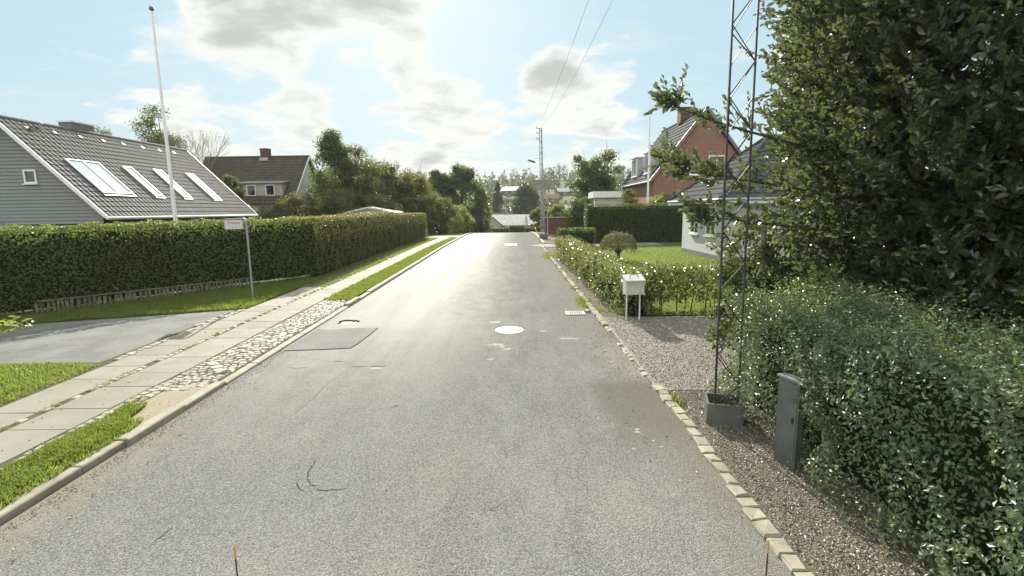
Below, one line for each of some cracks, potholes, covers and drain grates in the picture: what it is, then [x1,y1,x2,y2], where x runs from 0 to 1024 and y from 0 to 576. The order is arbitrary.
manhole cover [495,326,523,334]
crack [296,458,346,491]
